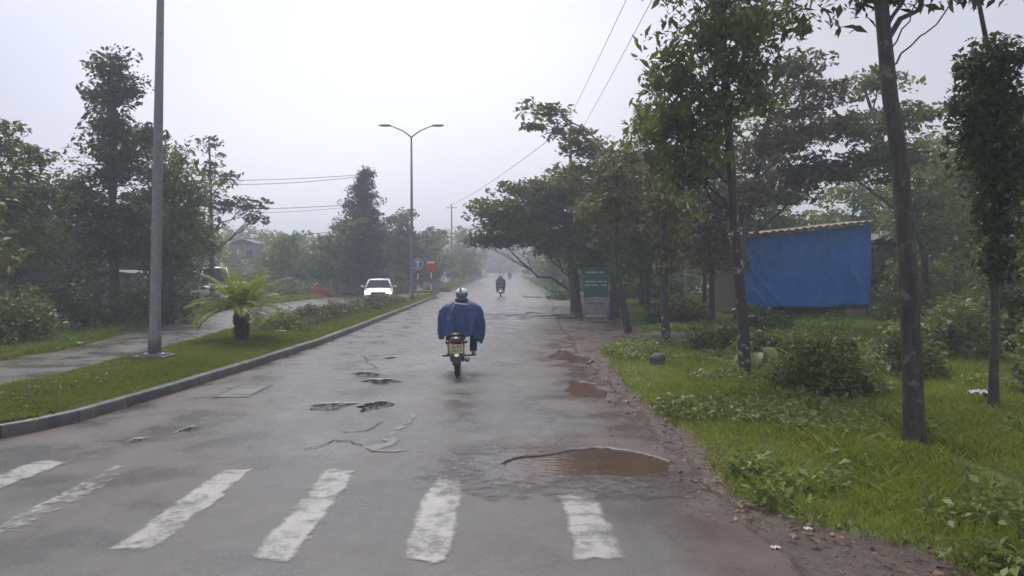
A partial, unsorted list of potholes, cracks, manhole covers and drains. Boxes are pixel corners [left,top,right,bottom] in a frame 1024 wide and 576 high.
pothole [357,377,405,386]
pothole [564,379,610,401]
crack [304,414,416,452]
pothole [122,436,153,445]
pothole [501,445,677,481]
pothole [171,424,202,434]
pothole [546,349,594,364]
manhole cover [212,385,272,398]
pothole [352,399,399,415]
pothole [303,401,365,414]
